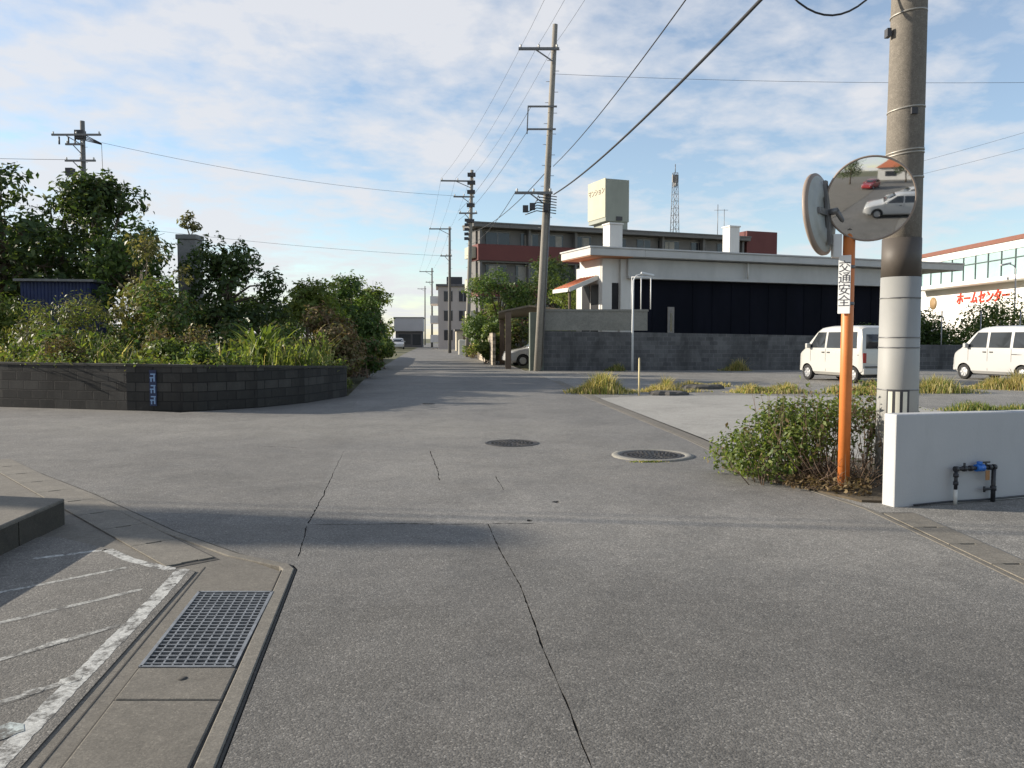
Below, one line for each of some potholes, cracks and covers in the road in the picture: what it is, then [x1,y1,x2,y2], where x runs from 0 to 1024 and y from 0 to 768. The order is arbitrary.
crack [298,451,592,768]
manhole cover [485,439,539,447]
manhole cover [612,449,694,462]
drain grate [138,591,273,669]
